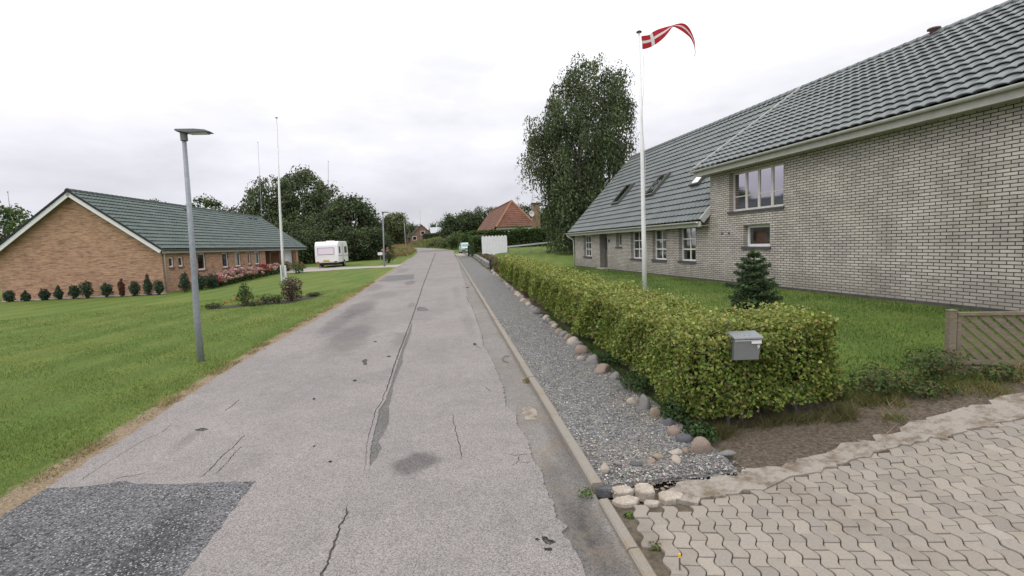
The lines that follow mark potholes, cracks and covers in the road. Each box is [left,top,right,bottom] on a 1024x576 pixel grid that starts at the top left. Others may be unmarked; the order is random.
crack [364,253,436,470]
crack [320,507,349,576]
crack [203,436,244,476]
